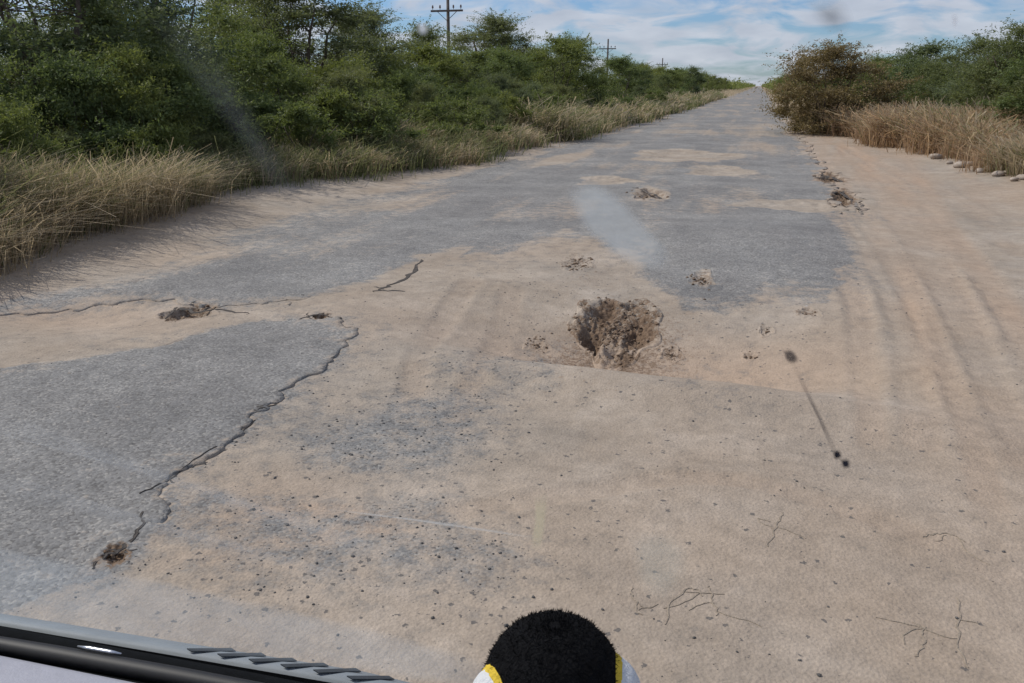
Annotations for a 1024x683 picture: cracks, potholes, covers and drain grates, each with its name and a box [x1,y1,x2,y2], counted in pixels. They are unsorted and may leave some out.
crack [757,512,806,547]
crack [373,259,423,292]
pothole [625,185,674,203]
crack [630,586,761,627]
crack [139,403,277,494]
crack [92,511,146,569]
crack [876,597,979,668]
pothole [720,199,864,214]
pothole [804,170,855,187]
pothole [88,538,134,569]
crack [923,532,990,565]
pothole [550,297,699,371]
